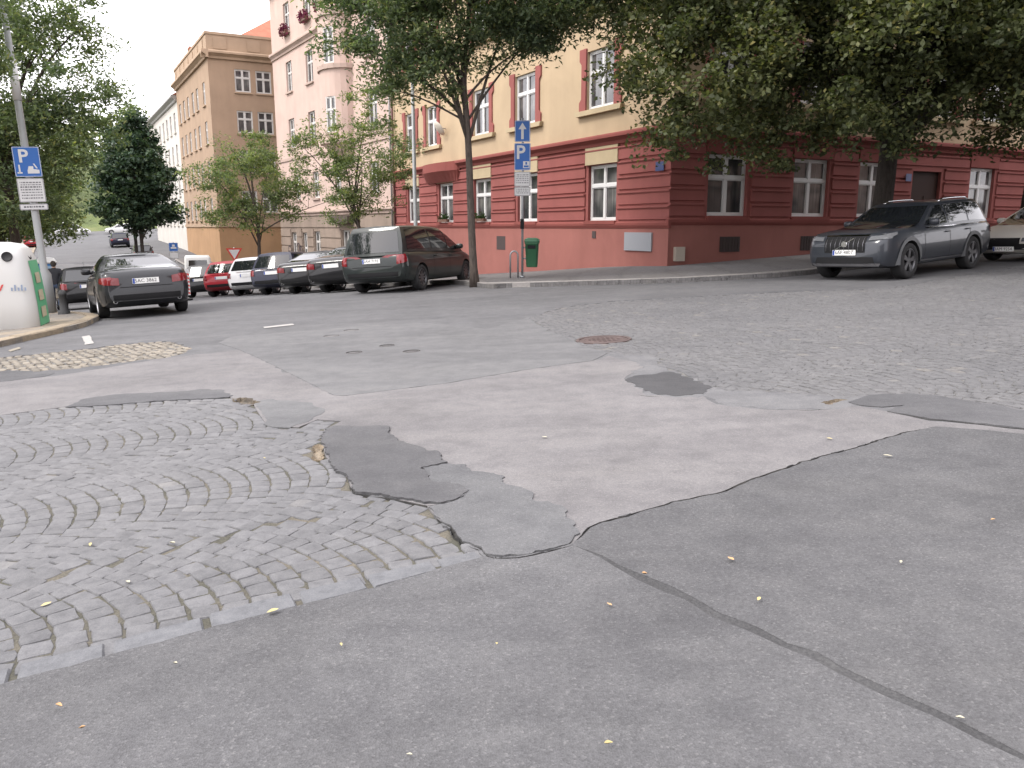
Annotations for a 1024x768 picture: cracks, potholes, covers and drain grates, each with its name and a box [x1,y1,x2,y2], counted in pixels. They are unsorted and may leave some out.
manhole cover [576,335,632,344]
pothole [311,444,324,462]
pothole [232,397,259,406]
